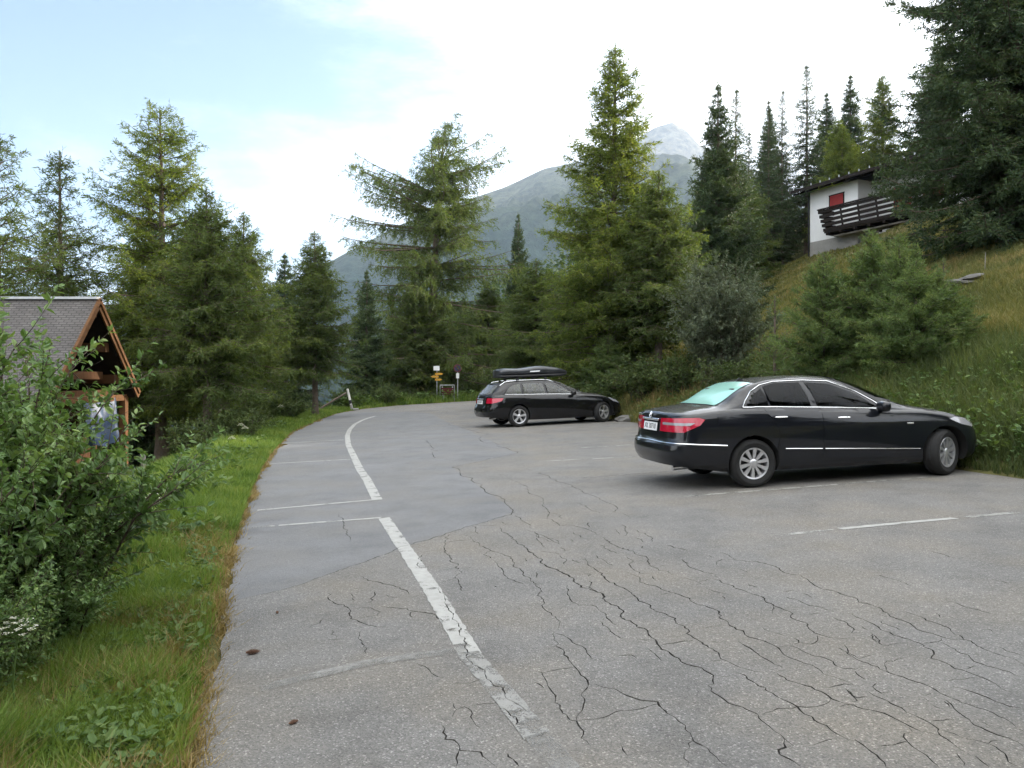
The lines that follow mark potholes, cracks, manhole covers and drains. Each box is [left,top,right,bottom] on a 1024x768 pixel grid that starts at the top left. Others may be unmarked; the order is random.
crack [314,535,553,766]
crack [466,467,1024,766]
